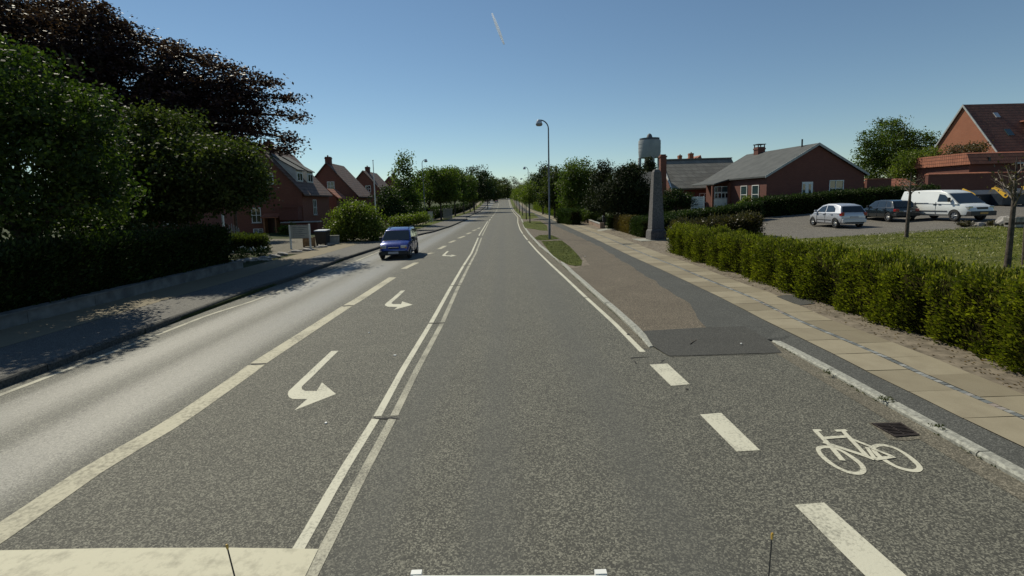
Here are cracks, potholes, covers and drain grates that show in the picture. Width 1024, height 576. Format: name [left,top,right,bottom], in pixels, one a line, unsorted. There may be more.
drain grate [872,422,920,437]
